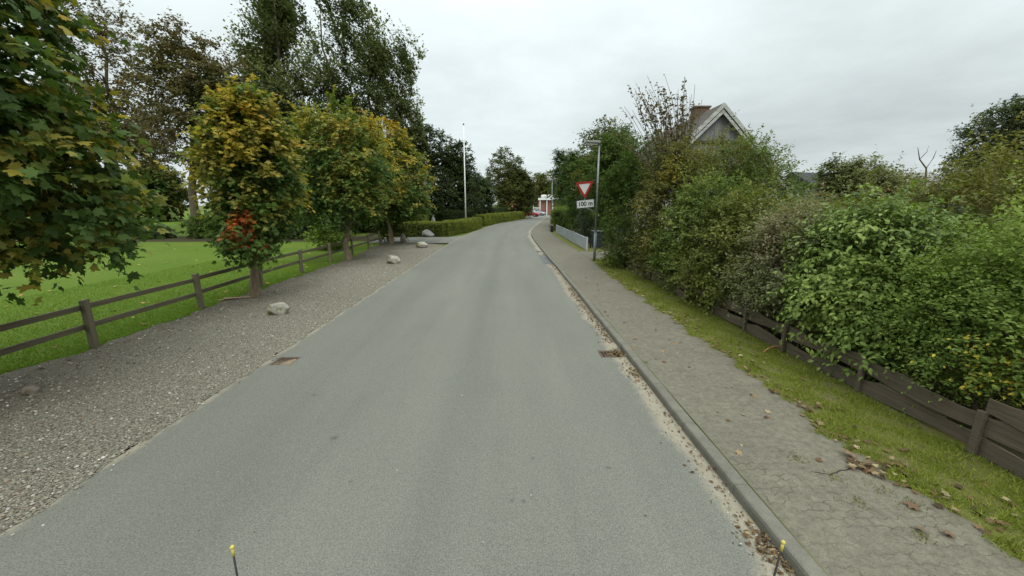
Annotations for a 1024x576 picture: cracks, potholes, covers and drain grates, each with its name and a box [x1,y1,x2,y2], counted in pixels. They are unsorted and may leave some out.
drain grate [270,357,301,365]
